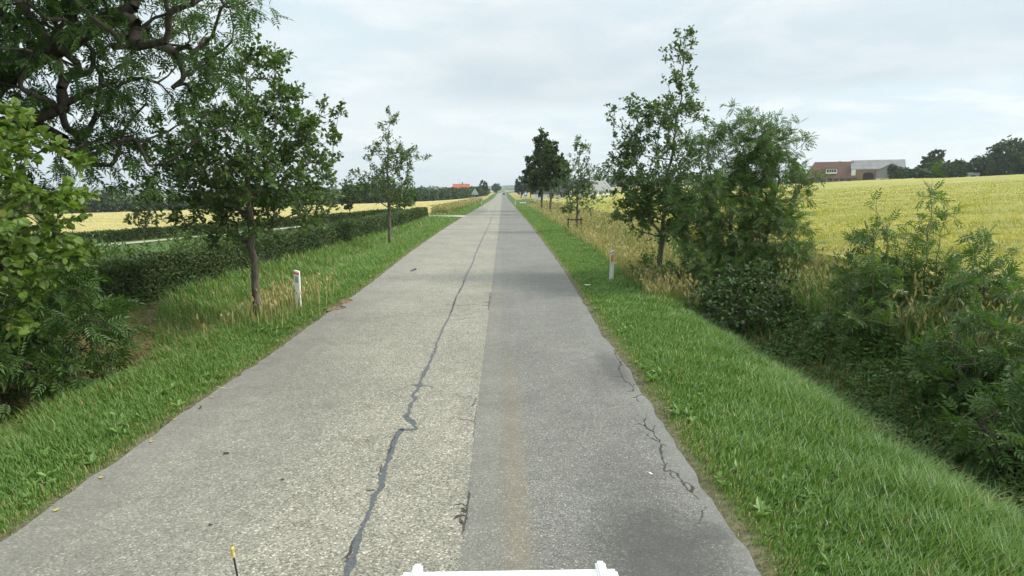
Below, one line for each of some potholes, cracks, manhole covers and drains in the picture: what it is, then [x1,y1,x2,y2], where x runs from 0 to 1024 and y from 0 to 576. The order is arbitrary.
crack [614,350,706,524]
crack [453,491,471,534]
